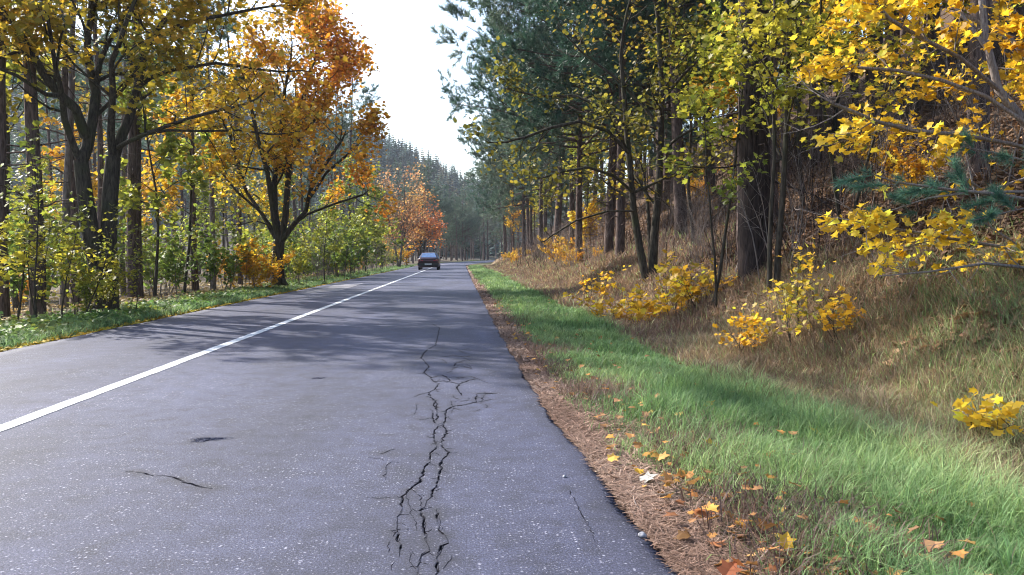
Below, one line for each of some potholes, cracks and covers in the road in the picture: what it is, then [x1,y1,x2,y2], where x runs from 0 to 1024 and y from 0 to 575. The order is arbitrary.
crack [125,471,213,489]
